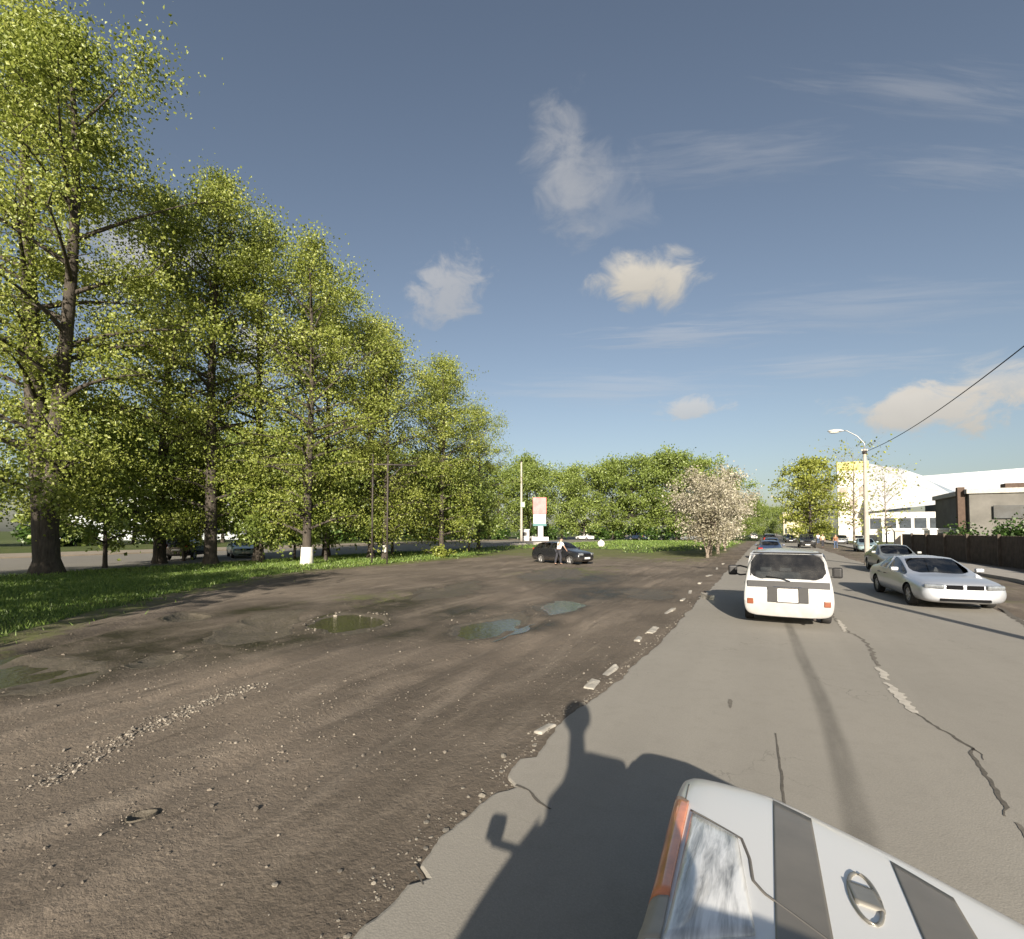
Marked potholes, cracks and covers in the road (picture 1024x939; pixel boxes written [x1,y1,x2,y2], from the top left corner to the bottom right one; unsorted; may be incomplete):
pothole [125,809,159,824]
pothole [529,601,586,616]
pothole [0,654,113,697]
crack [916,713,1024,836]
pothole [161,611,213,622]
pothole [305,612,391,635]
pothole [447,611,536,642]
crack [775,733,786,804]
crack [832,613,881,666]
